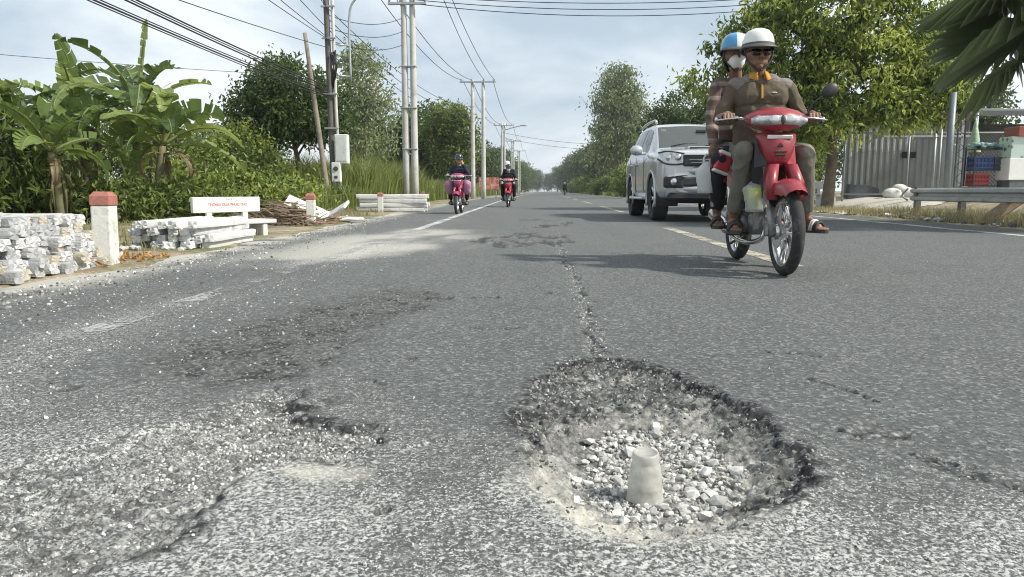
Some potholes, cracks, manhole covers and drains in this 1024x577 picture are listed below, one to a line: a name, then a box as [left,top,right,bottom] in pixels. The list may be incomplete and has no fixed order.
pothole [505,358,820,545]
crack [542,244,613,362]
crack [807,378,881,403]
crack [892,450,1024,496]
